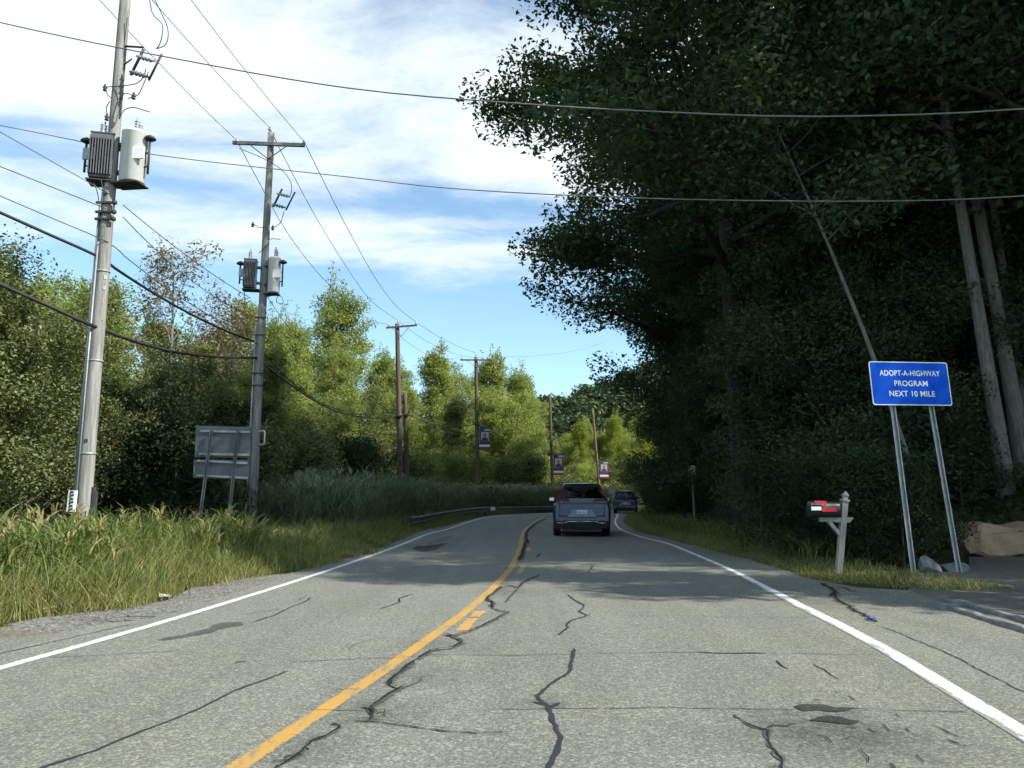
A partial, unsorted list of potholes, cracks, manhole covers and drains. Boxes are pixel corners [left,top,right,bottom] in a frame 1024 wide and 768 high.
crack [270,708,343,768]
crack [312,519,975,768]
